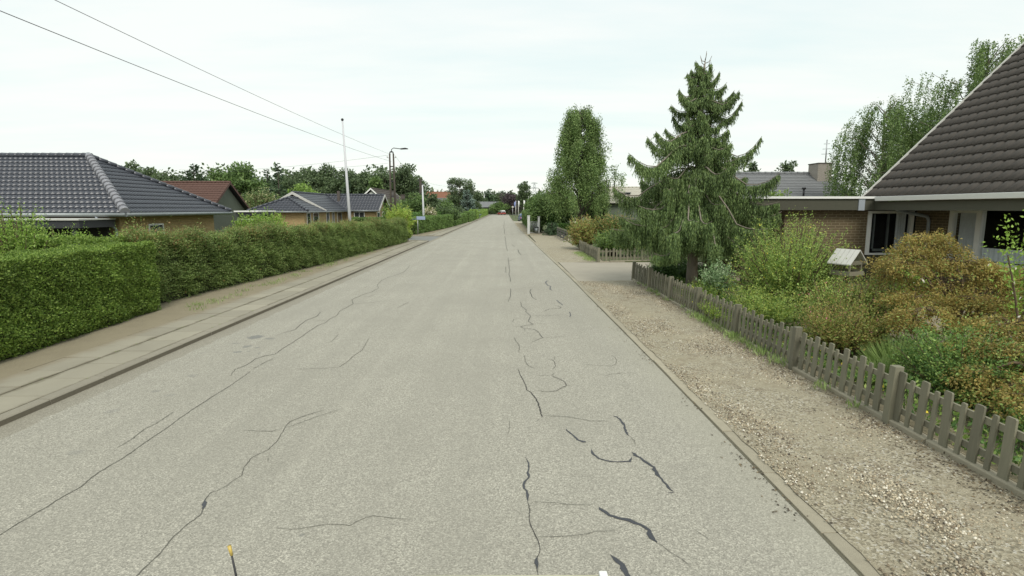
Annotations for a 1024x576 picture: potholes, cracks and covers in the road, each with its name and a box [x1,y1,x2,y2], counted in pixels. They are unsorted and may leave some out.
crack [523,457,620,573]
crack [0,268,408,535]
crack [512,287,593,421]
